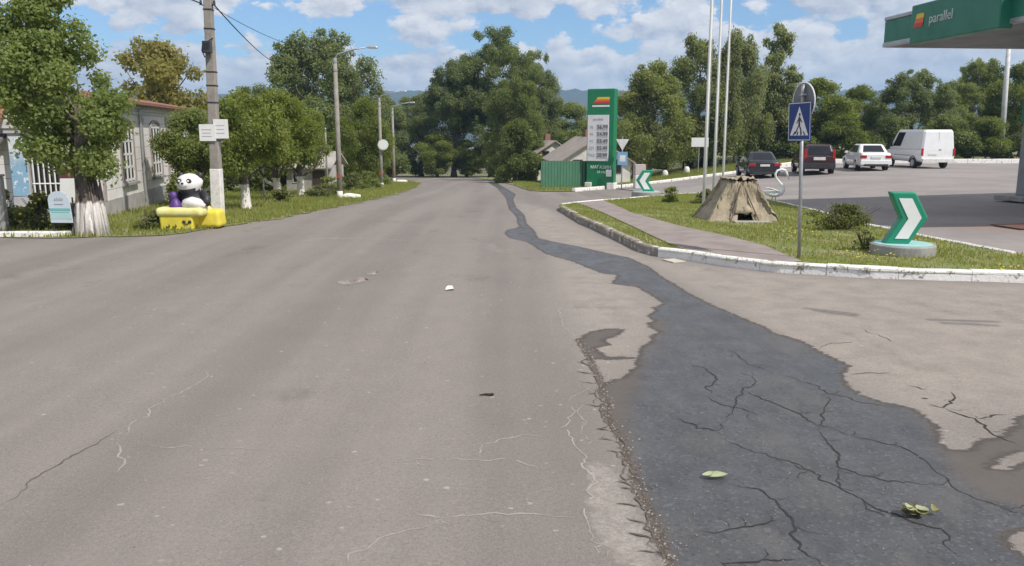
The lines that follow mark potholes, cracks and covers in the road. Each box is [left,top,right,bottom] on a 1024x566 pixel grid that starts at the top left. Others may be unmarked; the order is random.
crack [2,369,264,504]
crack [347,308,662,565]
pothole [333,277,374,285]
crack [678,350,1024,566]
